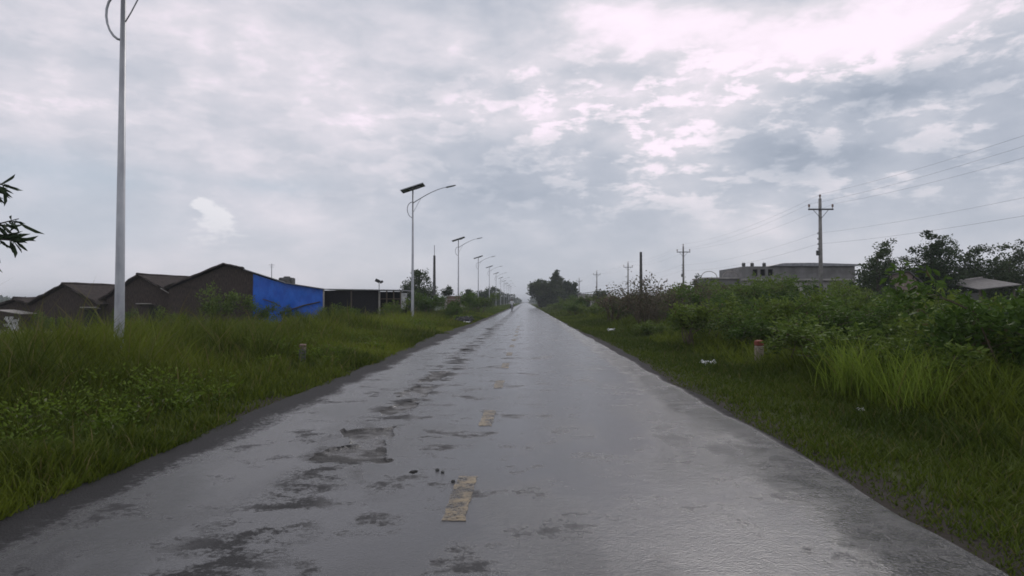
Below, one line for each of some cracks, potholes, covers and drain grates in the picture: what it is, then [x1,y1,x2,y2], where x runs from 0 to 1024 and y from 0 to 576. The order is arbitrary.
pothole [309,426,397,464]
pothole [374,399,420,417]
